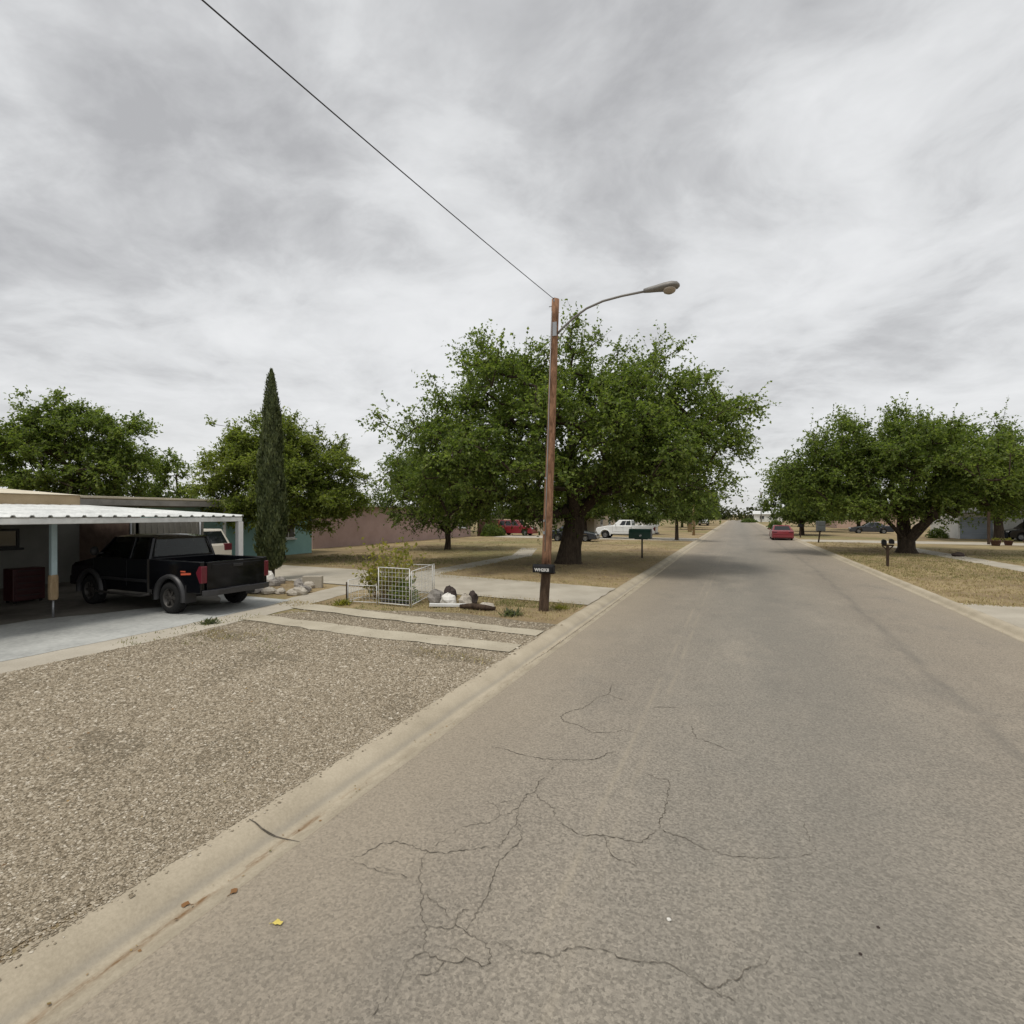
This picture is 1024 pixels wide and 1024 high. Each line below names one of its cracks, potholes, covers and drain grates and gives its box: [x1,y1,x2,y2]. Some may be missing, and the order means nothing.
crack [249,819,300,842]
crack [560,685,639,734]
crack [350,765,772,1016]
crack [558,774,818,866]
